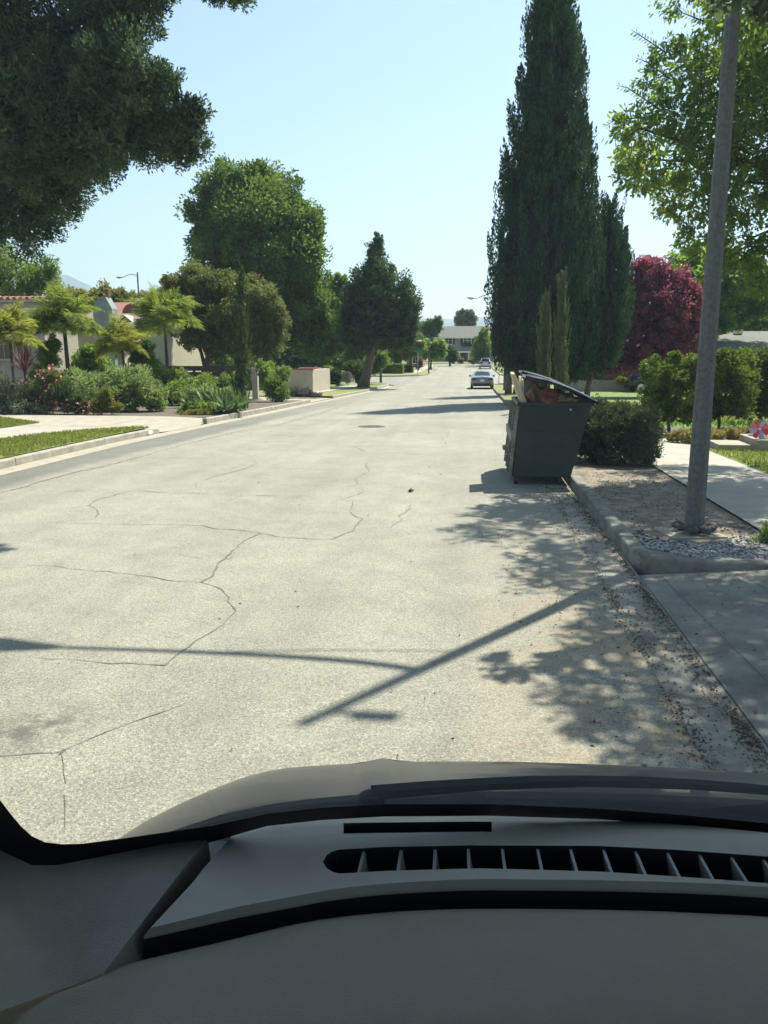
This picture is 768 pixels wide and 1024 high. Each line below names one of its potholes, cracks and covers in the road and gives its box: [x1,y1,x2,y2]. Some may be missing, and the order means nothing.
crack [43,446,390,665]
crack [0,702,187,812]
